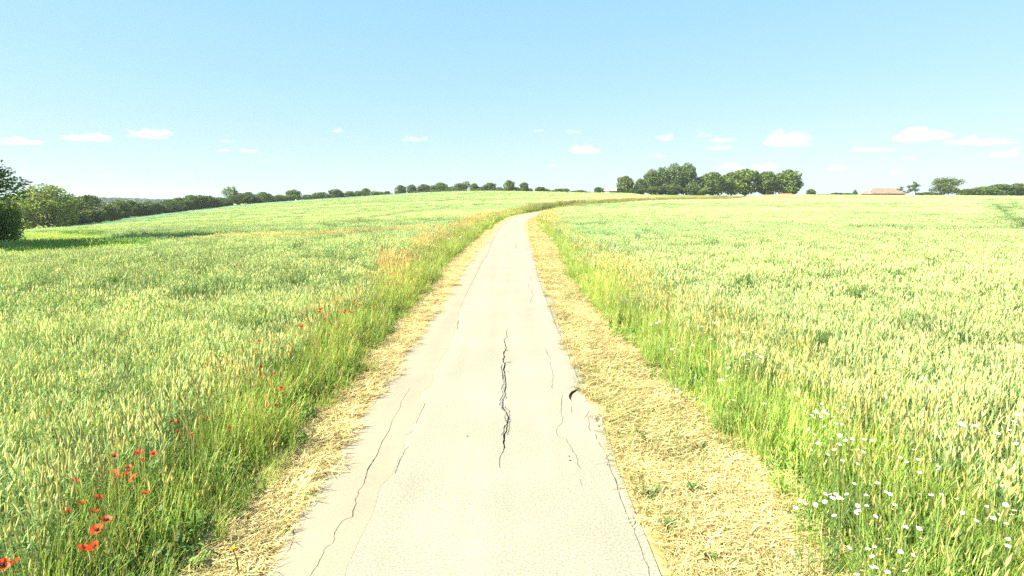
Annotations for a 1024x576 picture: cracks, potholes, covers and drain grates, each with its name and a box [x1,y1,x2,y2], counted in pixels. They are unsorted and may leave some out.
crack [528,274,650,576]
crack [499,332,512,466]
crack [310,390,425,576]
